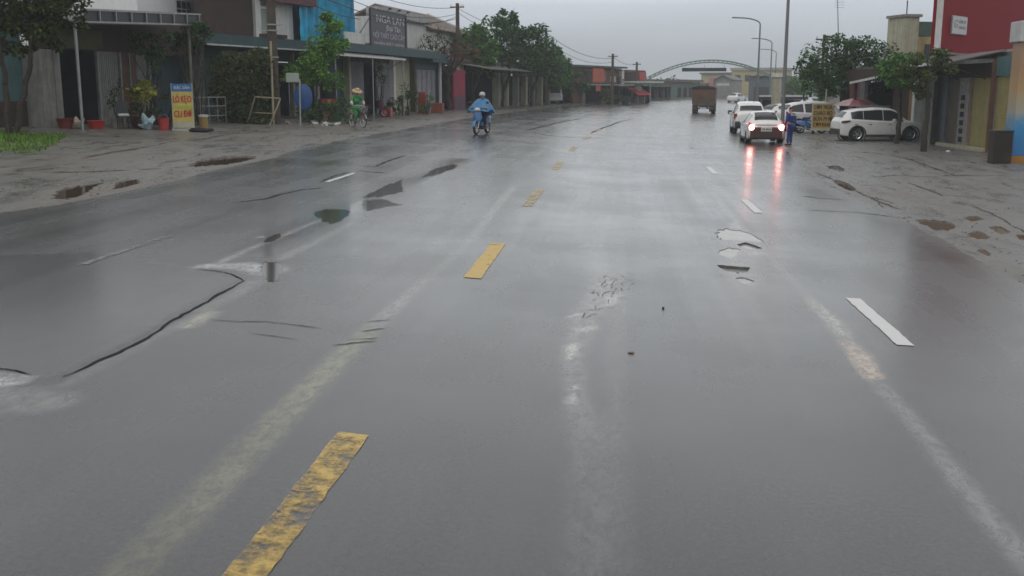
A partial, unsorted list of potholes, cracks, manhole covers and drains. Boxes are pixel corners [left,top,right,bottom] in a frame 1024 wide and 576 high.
pothole [362,199,403,211]
pothole [51,183,103,199]
pothole [989,226,1010,234]
pothole [916,219,957,231]
crack [336,319,392,345]
pothole [717,265,750,274]
crack [806,152,956,217]
pothole [967,231,990,239]
pothole [314,209,351,224]
pothole [715,228,764,242]
pothole [187,155,256,167]
pothole [833,180,859,191]
